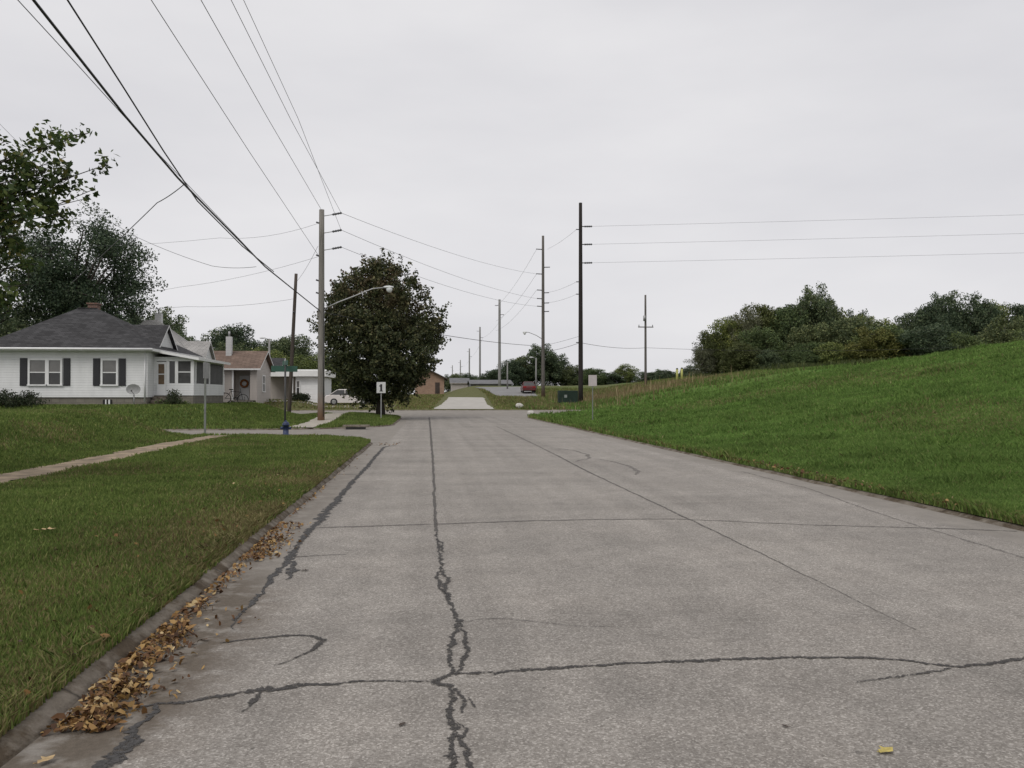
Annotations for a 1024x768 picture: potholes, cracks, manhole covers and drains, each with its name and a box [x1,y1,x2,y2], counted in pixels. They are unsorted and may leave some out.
crack [142,417,1024,768]
